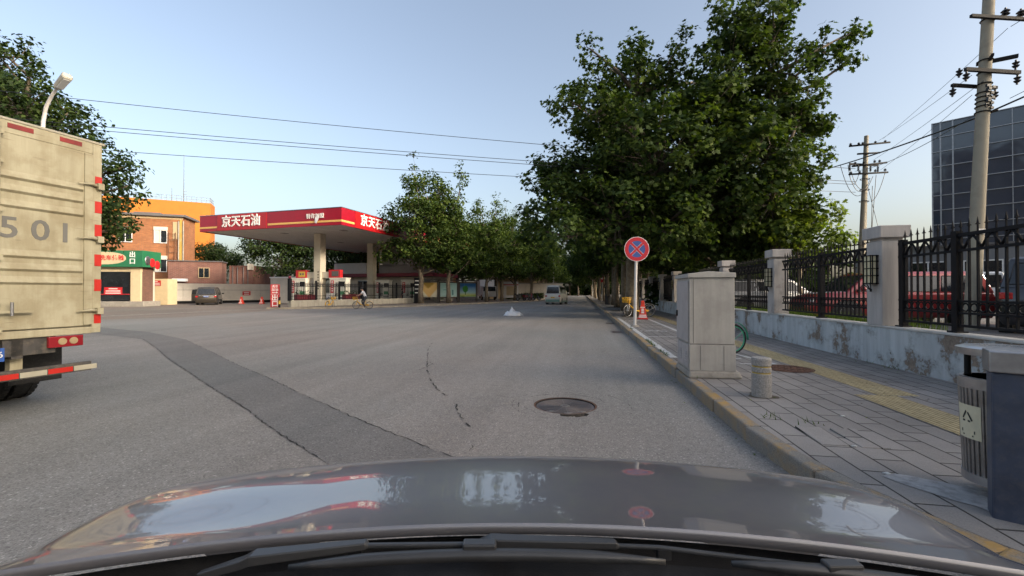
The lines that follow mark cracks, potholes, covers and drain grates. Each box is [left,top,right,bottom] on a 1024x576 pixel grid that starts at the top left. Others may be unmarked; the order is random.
manhole cover [771,364,816,373]
crack [419,343,473,451]
manhole cover [534,398,597,414]
